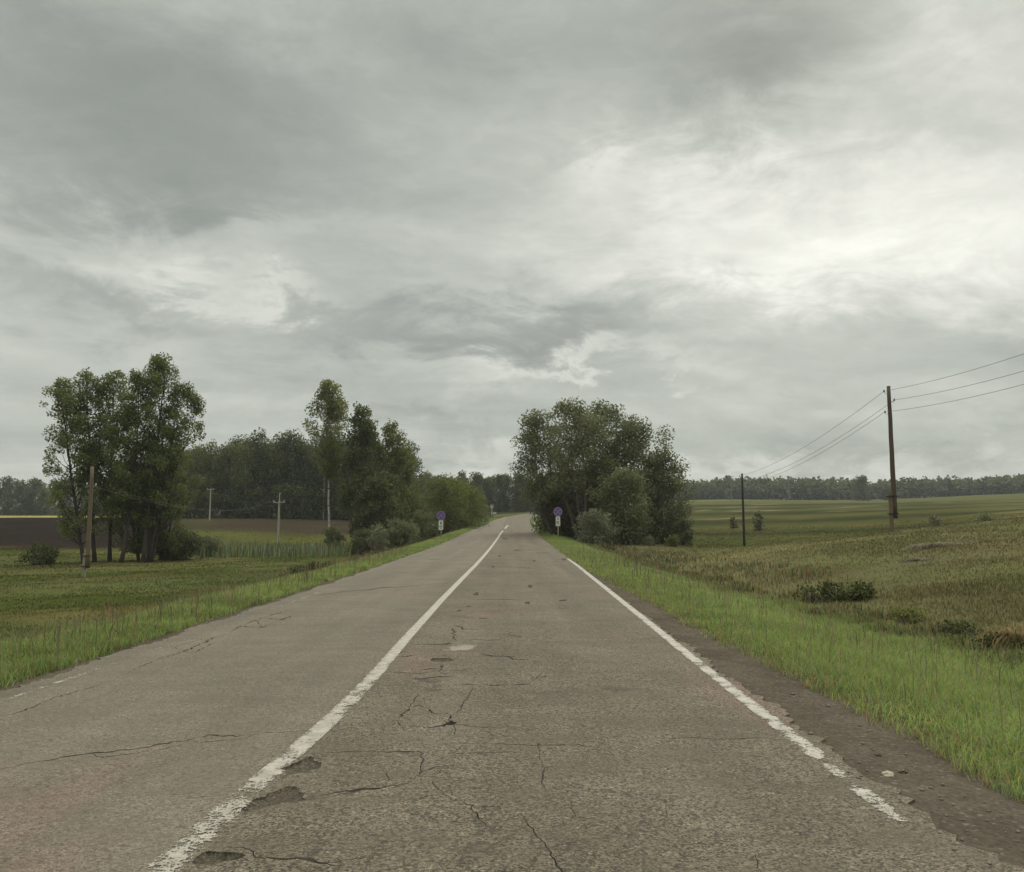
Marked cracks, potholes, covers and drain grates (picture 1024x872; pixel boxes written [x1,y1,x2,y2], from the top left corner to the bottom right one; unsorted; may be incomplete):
pothole [240,786,306,815]
crack [129,611,292,672]
crack [508,799,613,872]
crack [0,731,311,770]
pothole [192,851,245,866]
crack [318,599,629,832]
pothole [281,756,322,776]
